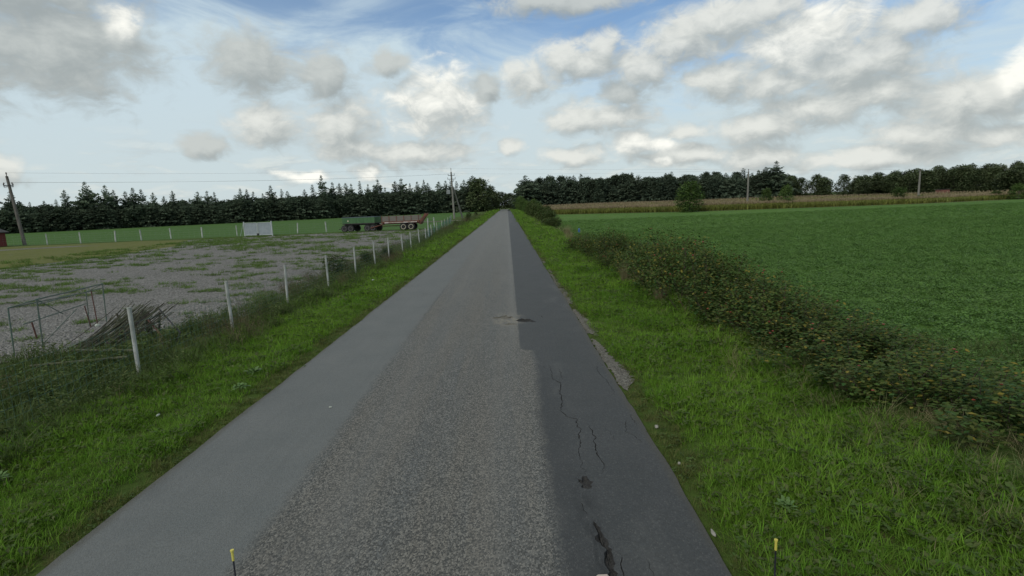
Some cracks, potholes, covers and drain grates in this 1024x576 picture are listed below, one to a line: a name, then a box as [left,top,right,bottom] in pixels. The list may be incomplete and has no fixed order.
pothole [578,476,593,489]
crack [543,364,637,473]
